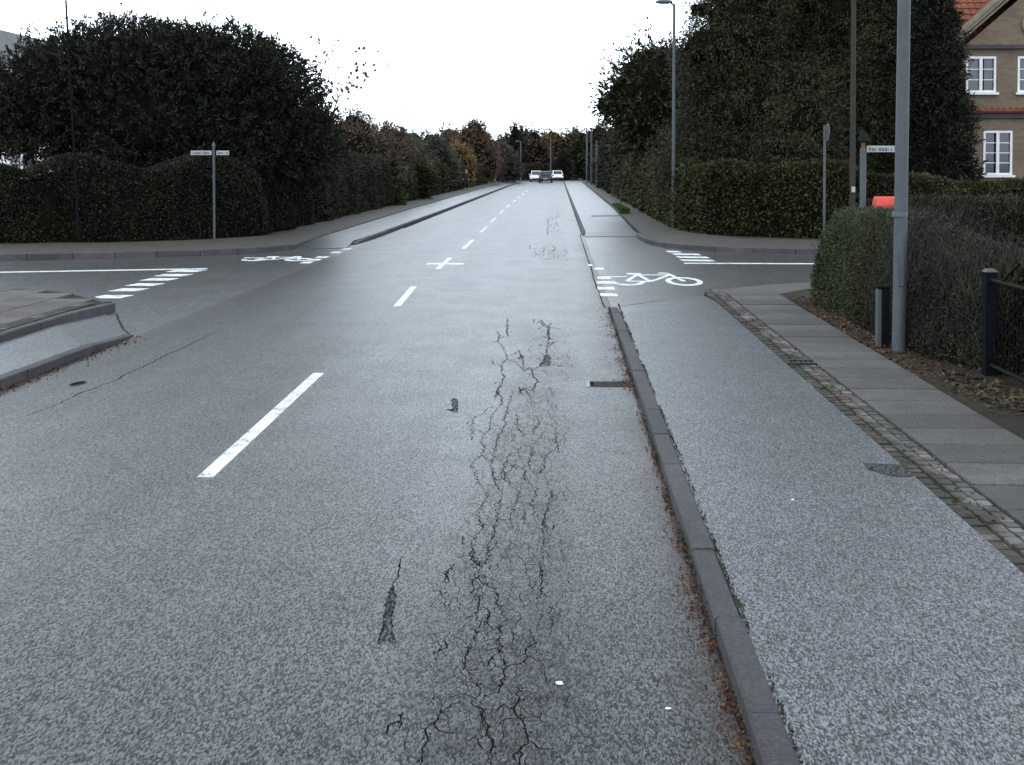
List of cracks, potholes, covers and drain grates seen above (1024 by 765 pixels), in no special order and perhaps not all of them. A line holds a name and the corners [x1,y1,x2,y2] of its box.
pothole [377,585,398,645]
crack [529,216,567,261]
